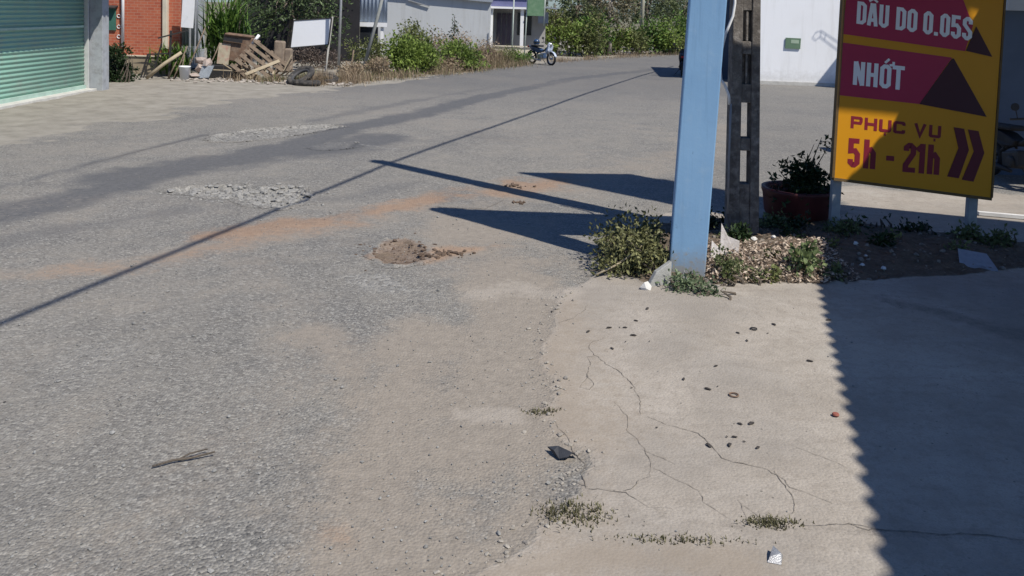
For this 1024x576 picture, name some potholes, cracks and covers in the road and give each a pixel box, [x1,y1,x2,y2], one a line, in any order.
crack [556,338,731,519]
pothole [354,232,440,271]
pothole [156,181,336,213]
crack [647,416,827,513]
pothole [204,124,353,144]
